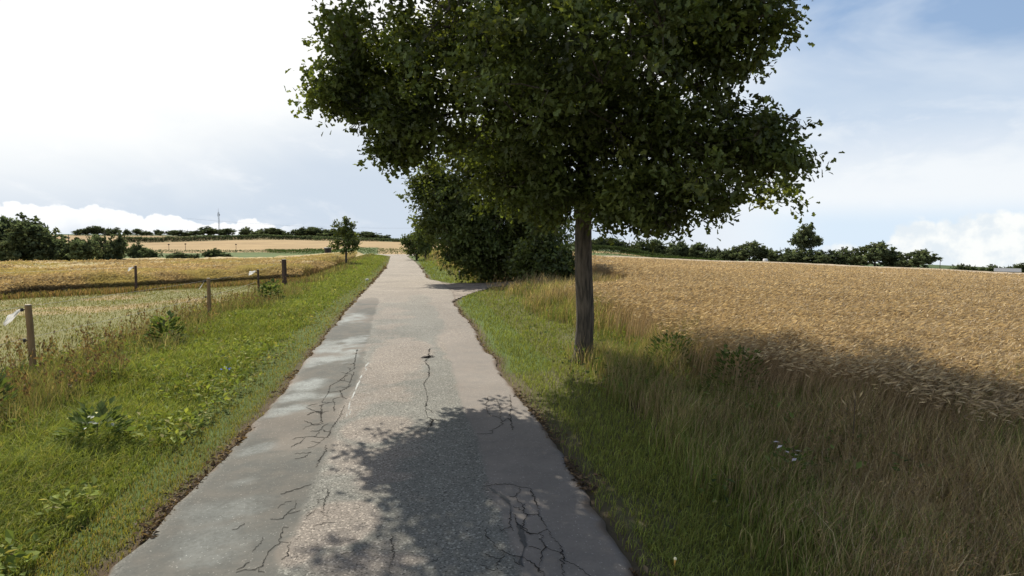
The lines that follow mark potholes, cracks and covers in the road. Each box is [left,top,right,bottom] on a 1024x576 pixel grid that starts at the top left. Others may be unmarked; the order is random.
crack [232,484,334,572]
crack [424,349,437,431]
crack [485,395,514,434]
crack [479,483,590,576]
crack [291,350,358,467]
